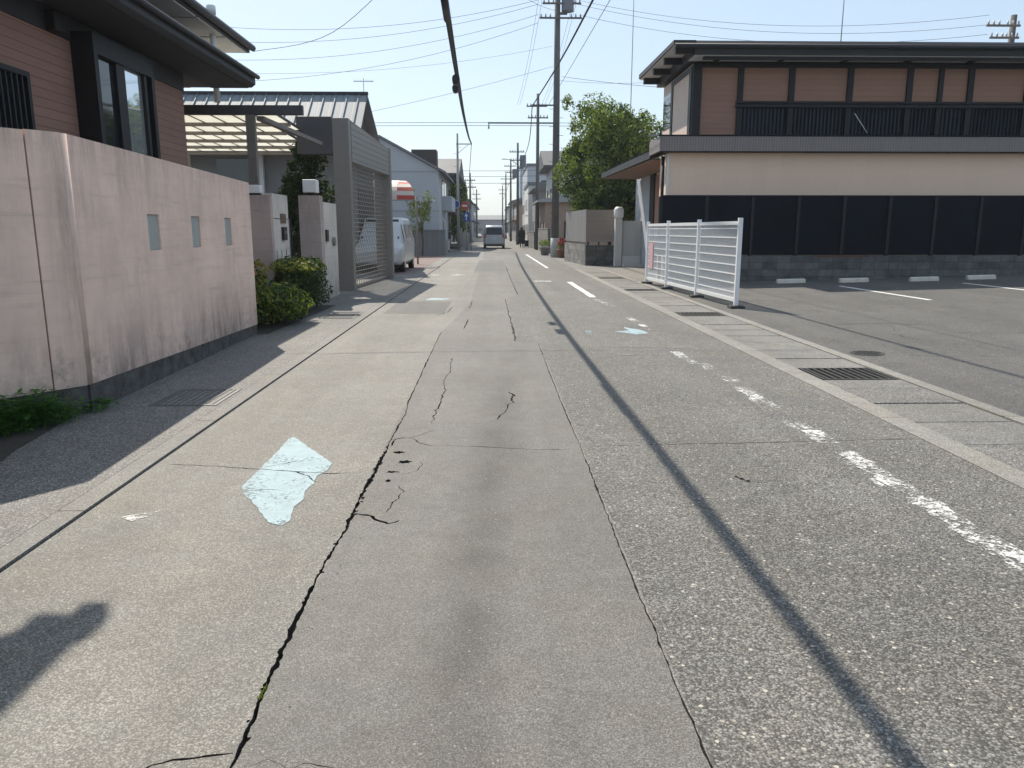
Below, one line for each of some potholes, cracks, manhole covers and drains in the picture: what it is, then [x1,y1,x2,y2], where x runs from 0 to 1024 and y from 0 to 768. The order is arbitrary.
drain grate [148,389,242,414]
crack [146,335,553,768]
drain grate [799,368,899,380]
